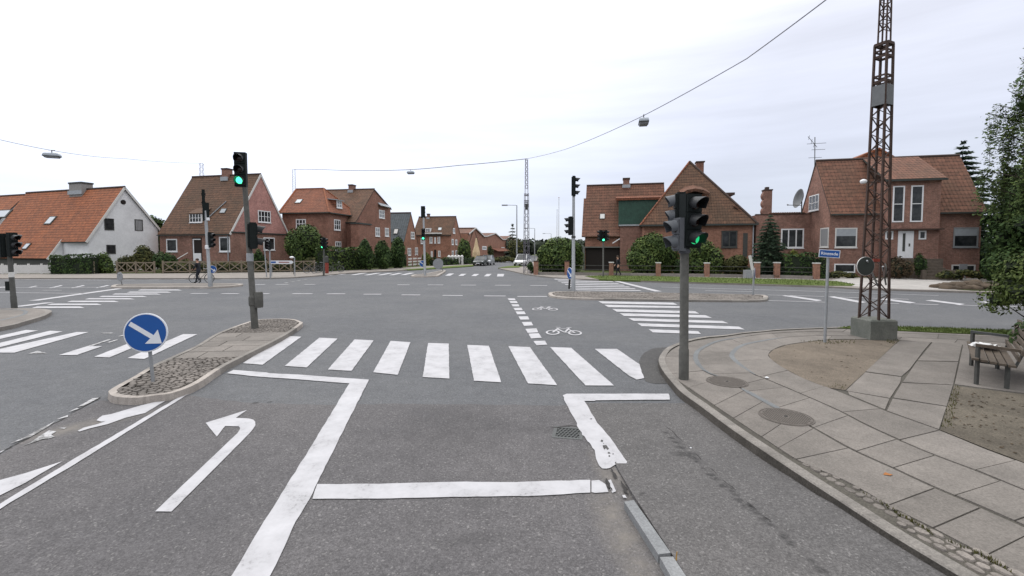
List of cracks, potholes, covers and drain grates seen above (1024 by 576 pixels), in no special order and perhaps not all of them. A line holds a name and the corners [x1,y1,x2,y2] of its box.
manhole cover [706,376,749,388]
manhole cover [758,408,815,427]
